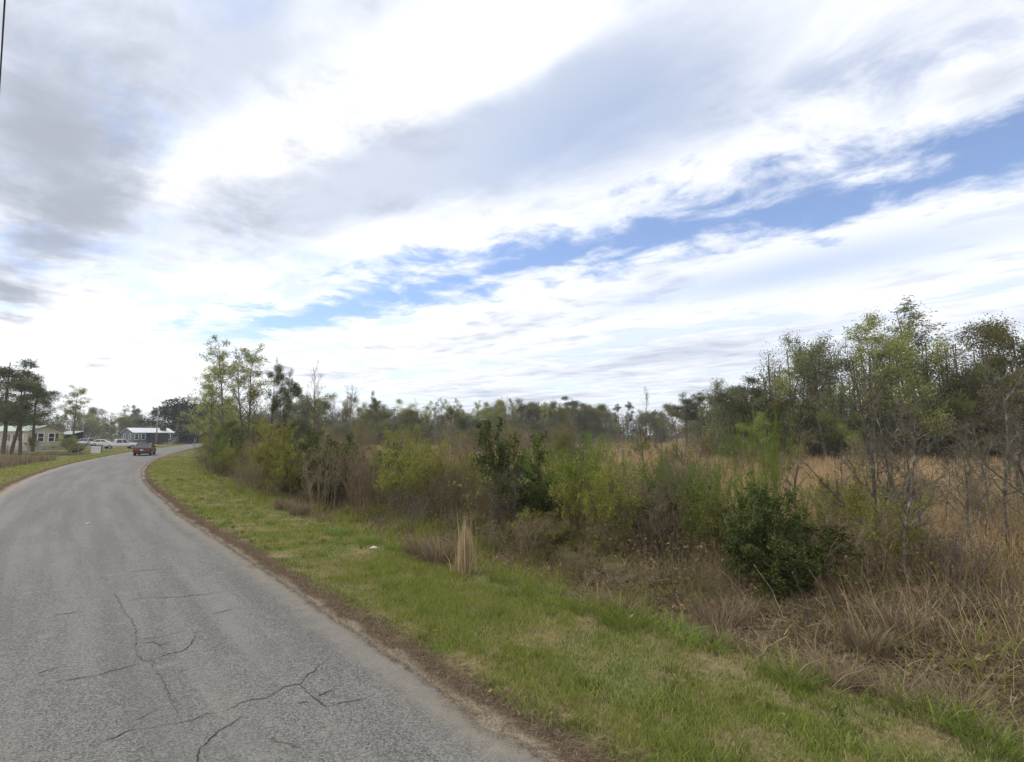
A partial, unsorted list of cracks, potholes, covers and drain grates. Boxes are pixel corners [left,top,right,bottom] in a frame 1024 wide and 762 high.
crack [61,584,369,762]
